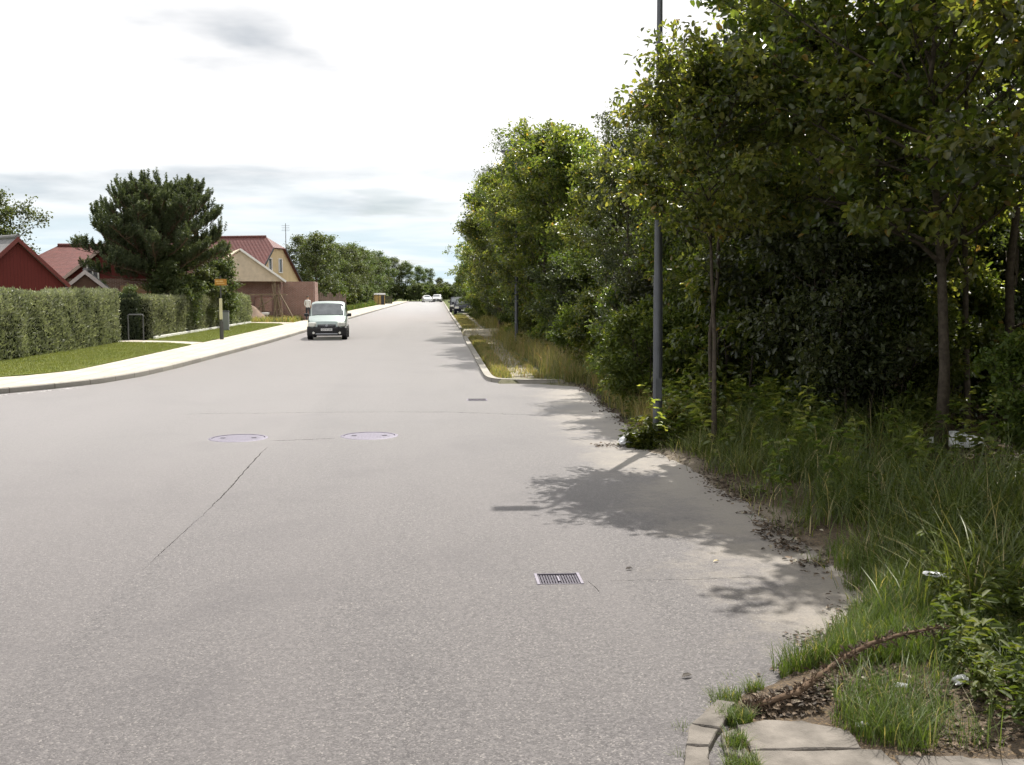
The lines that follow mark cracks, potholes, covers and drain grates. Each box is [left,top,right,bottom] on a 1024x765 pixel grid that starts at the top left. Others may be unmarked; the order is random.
manhole cover [340,432,398,440]
drain grate [534,572,584,585]
crack [145,438,332,568]
manhole cover [208,434,268,442]
